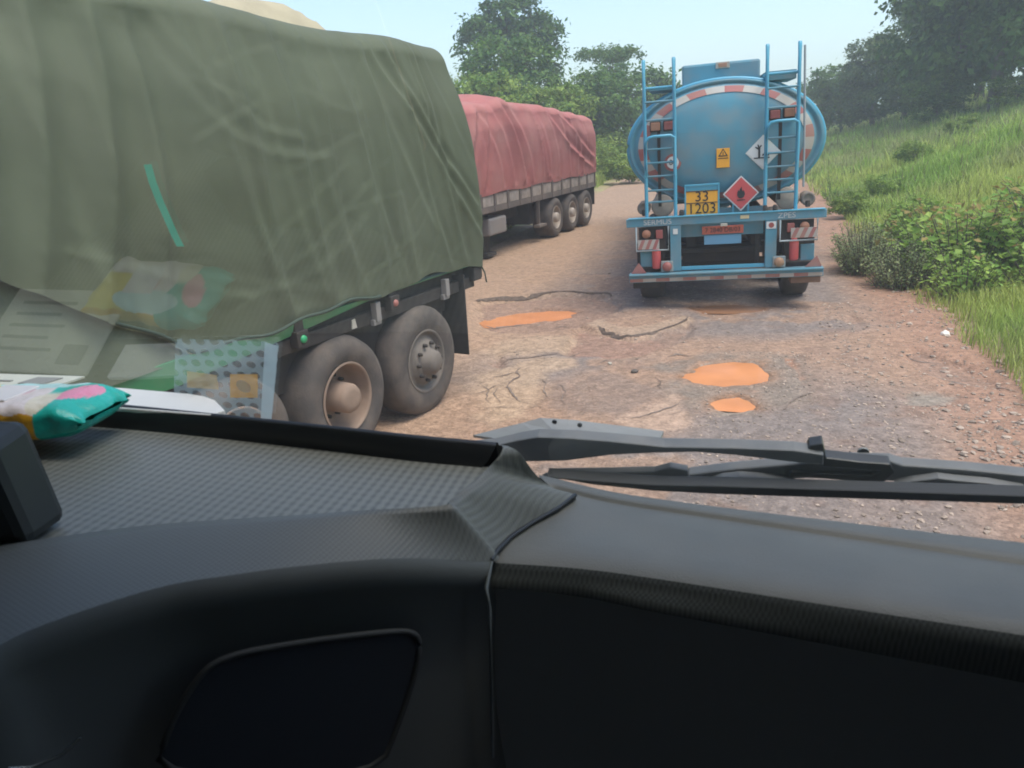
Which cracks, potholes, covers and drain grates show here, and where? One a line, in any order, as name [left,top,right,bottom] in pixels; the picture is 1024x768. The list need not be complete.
crack [478,352,581,410]
crack [477,290,612,301]
pothole [709,396,761,417]
pothole [682,360,774,387]
pothole [692,304,766,315]
